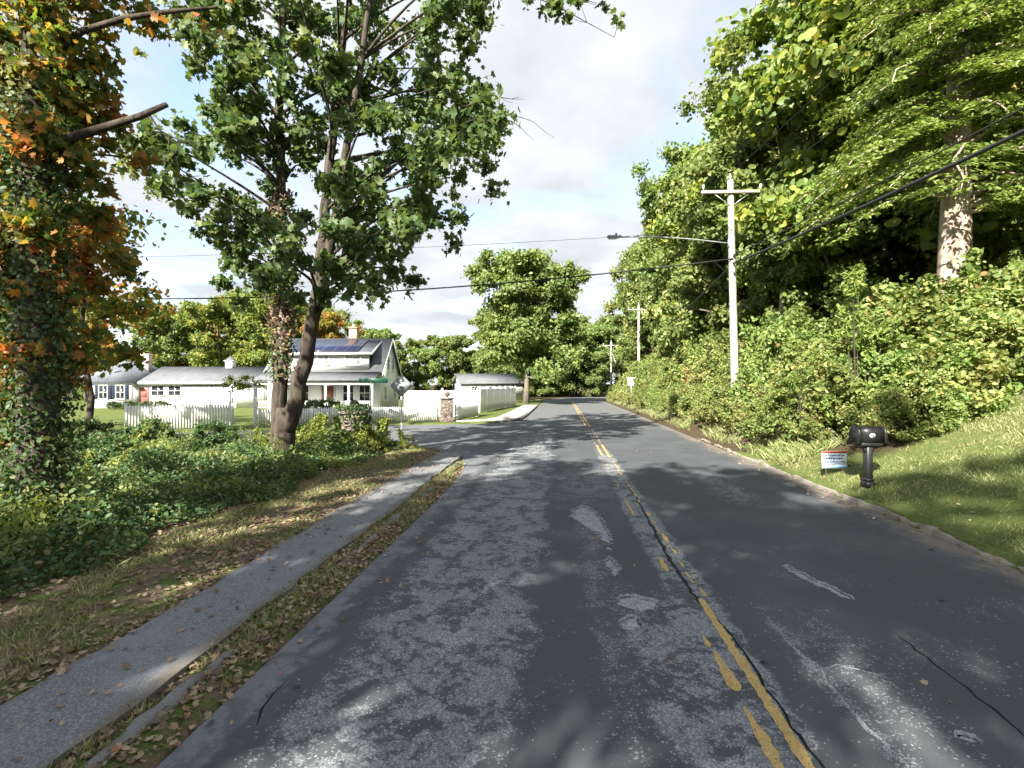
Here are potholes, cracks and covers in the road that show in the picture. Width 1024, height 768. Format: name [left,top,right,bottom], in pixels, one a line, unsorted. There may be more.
crack [624,483,1024,768]
crack [257,678,290,725]
